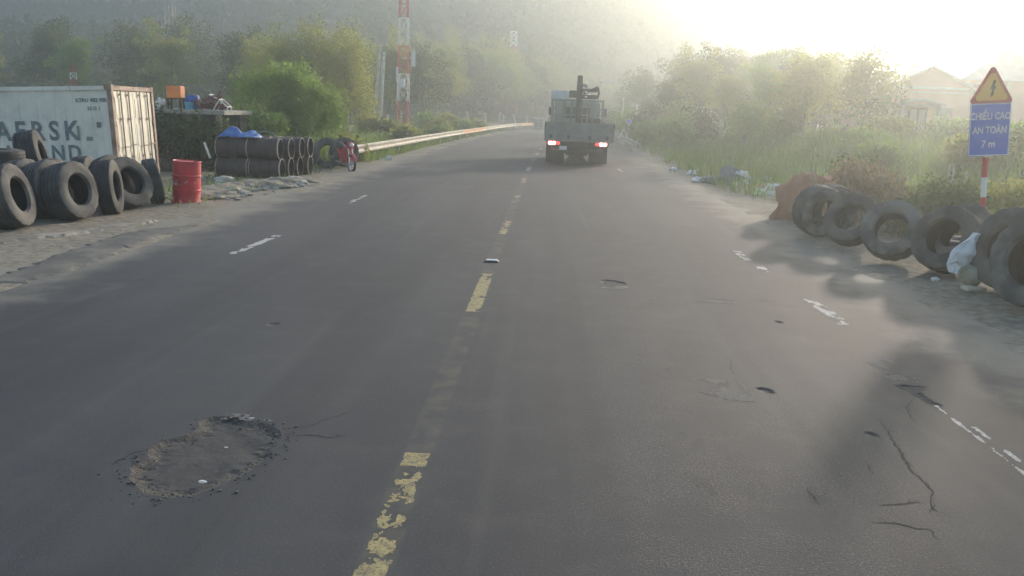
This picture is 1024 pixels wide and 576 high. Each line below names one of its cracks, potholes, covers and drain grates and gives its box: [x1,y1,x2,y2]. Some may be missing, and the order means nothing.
pothole [129,416,282,498]
pothole [754,387,777,395]
crack [864,400,949,540]
crack [293,411,353,438]
